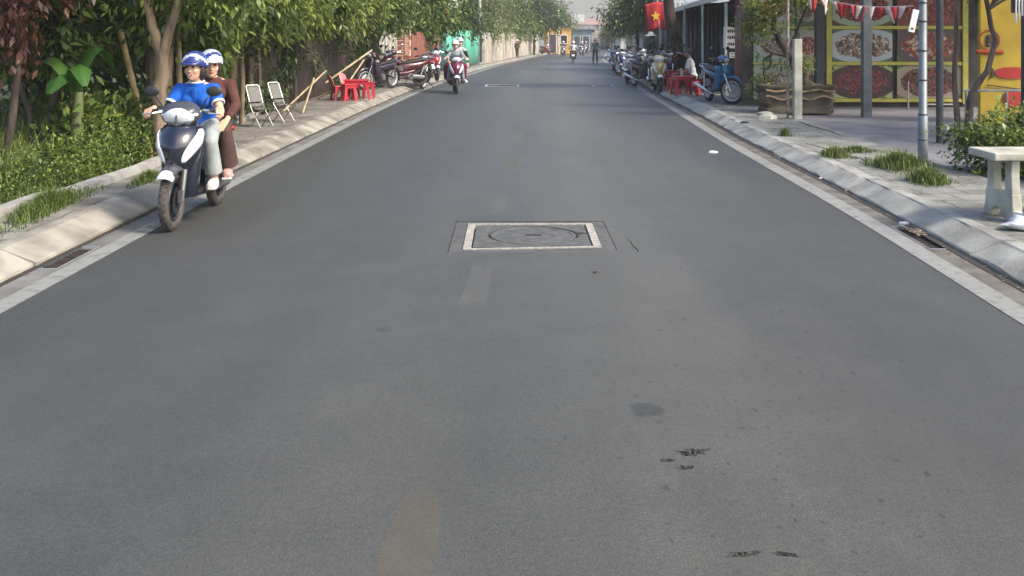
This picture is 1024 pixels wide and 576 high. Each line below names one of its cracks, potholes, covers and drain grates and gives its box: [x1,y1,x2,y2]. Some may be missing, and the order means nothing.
pothole [677,448,711,457]
manhole cover [448,222,617,253]
drain grate [890,226,946,249]
drain grate [37,246,100,269]
